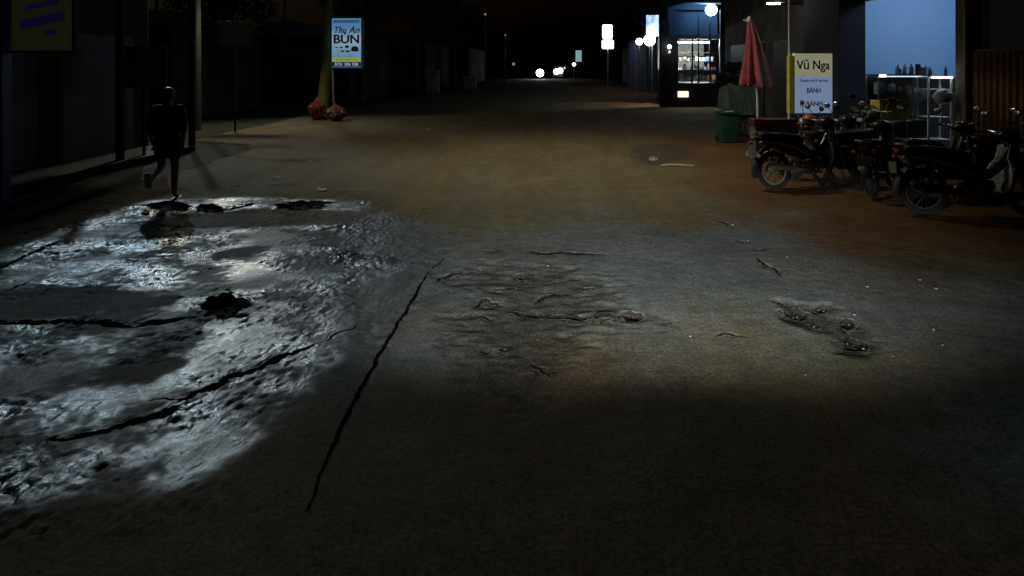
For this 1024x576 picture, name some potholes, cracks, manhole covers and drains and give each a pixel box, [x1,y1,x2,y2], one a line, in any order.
pothole [140,200,198,212]
pothole [833,319,859,335]
pothole [778,307,813,323]
crack [0,258,612,512]
crack [0,240,65,291]
pothole [838,337,872,355]
pothole [271,200,338,212]
pothole [190,203,229,214]
crack [713,219,790,291]
pothole [193,291,262,325]
pothole [810,304,830,317]
